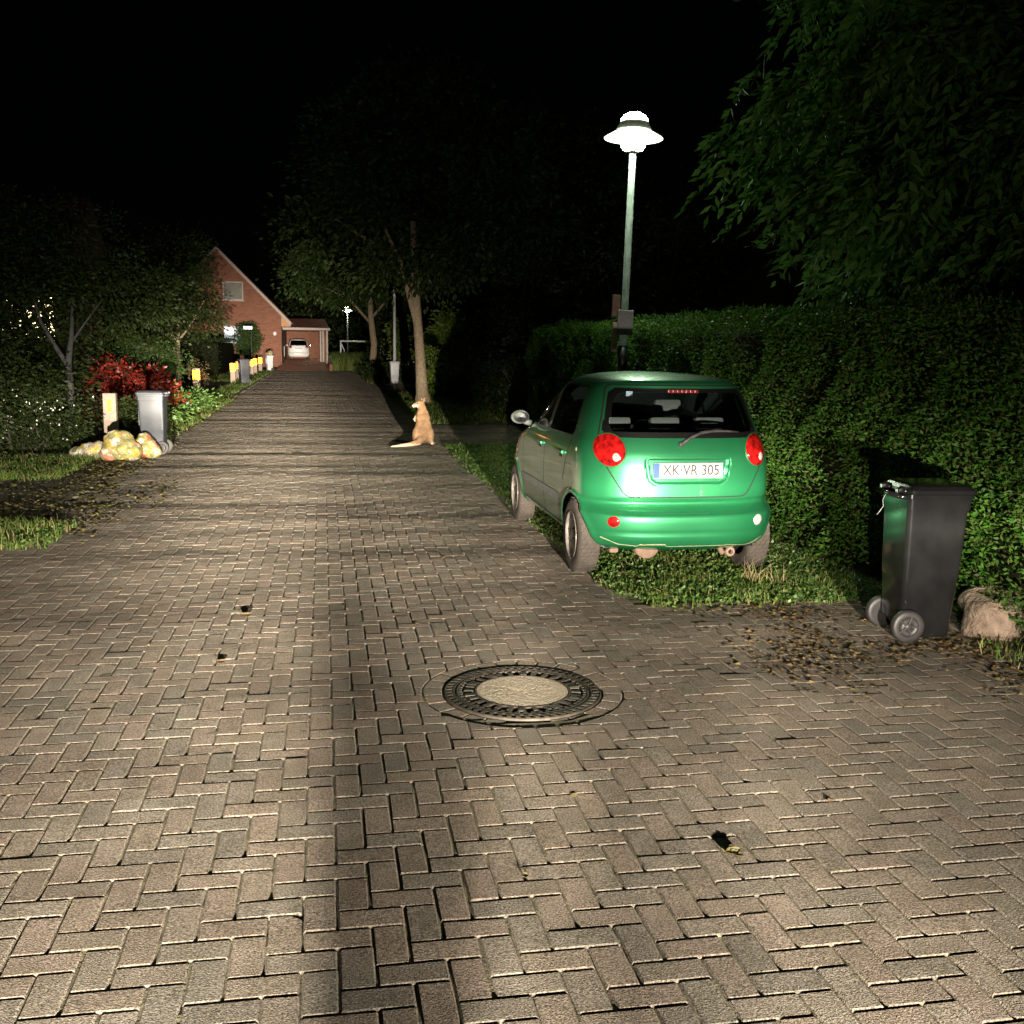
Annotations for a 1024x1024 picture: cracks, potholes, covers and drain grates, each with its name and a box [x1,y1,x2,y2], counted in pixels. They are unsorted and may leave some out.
manhole cover [443,666,601,723]
